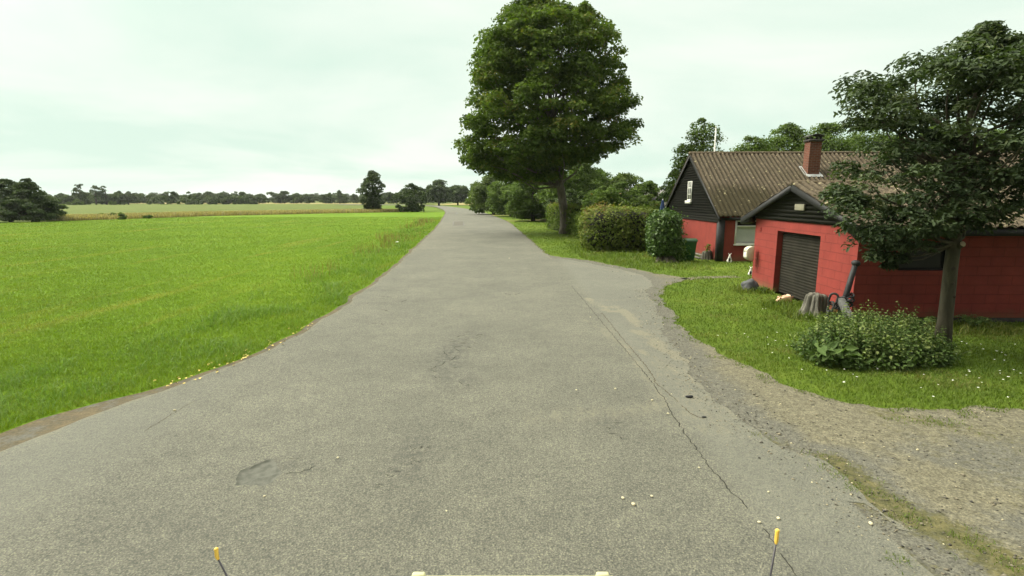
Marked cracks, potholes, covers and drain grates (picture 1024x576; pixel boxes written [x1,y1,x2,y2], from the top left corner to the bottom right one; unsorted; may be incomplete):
crack [431,331,481,384]
crack [577,292,797,576]
